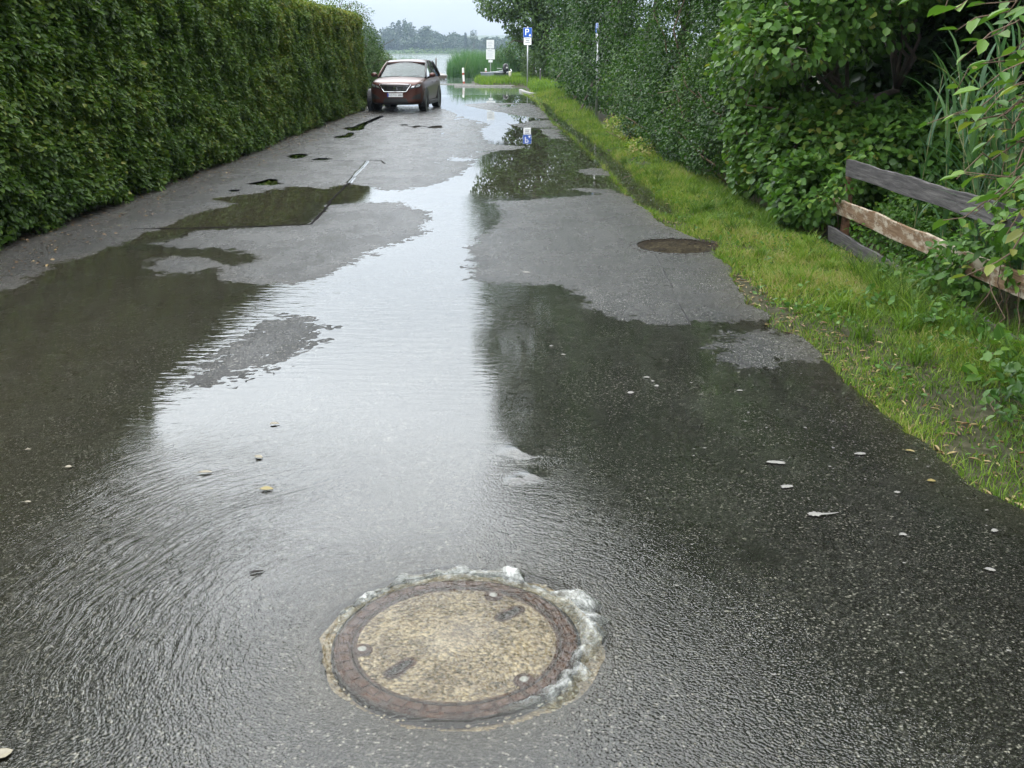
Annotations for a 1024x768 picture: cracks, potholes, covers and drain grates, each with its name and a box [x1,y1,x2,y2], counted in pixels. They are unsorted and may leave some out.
manhole cover [630,237,727,255]
manhole cover [331,580,582,728]
pothole [346,116,384,131]
